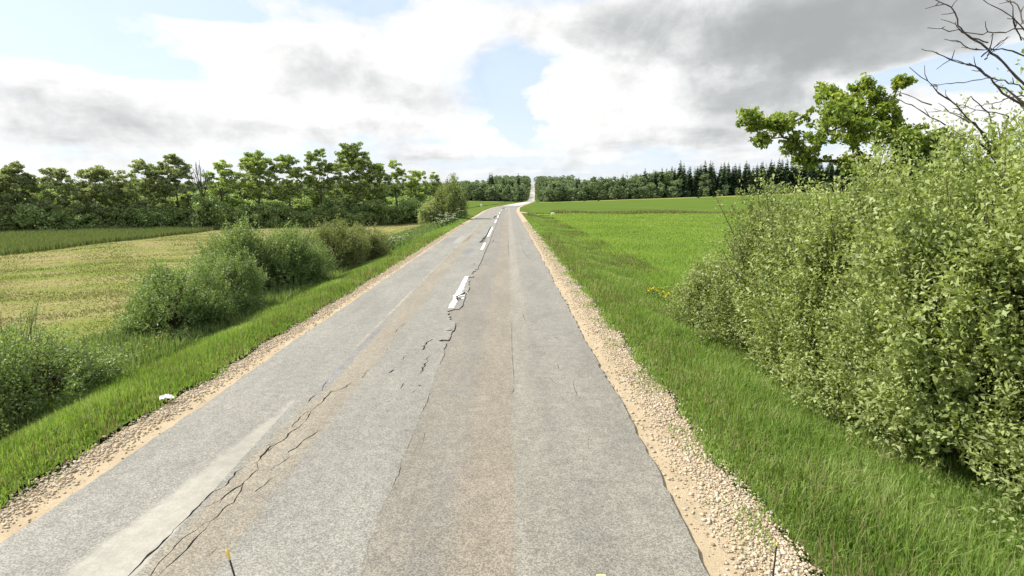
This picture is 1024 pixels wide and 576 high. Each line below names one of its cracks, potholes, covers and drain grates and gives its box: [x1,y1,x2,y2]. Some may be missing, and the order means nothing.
crack [386,330,452,392]
crack [128,370,369,576]
